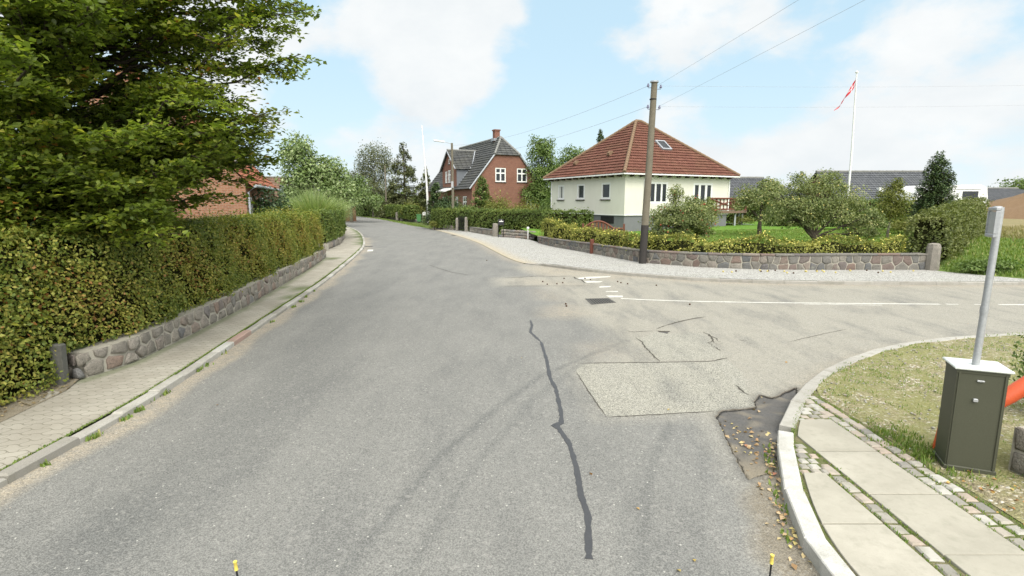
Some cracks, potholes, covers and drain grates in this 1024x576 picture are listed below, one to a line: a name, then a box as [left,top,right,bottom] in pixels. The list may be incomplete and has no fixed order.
crack [627,317,722,361]
pothole [715,387,798,480]
